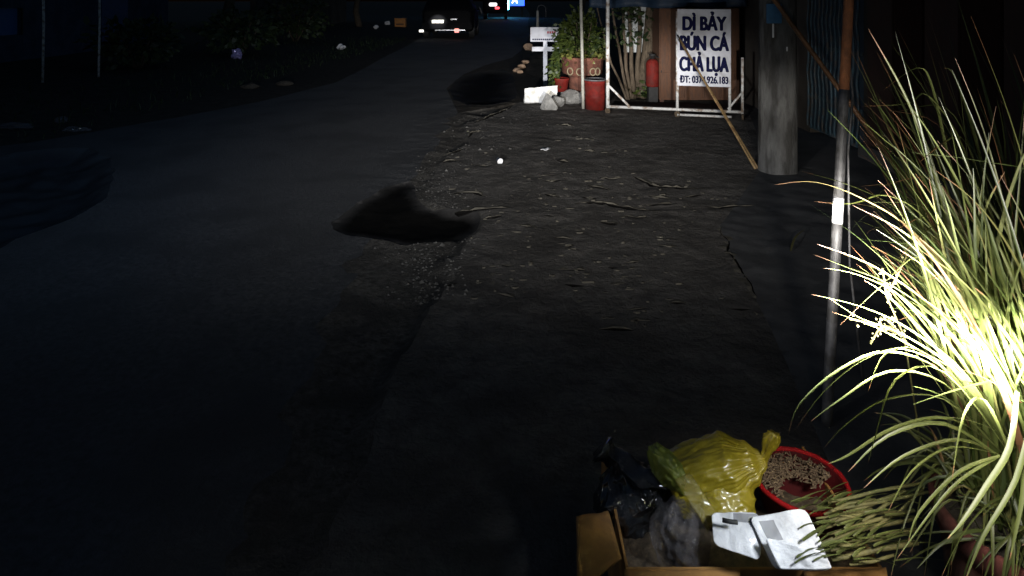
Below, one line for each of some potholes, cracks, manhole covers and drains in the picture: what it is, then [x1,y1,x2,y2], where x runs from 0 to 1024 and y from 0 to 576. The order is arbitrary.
pothole [331,181,481,245]
